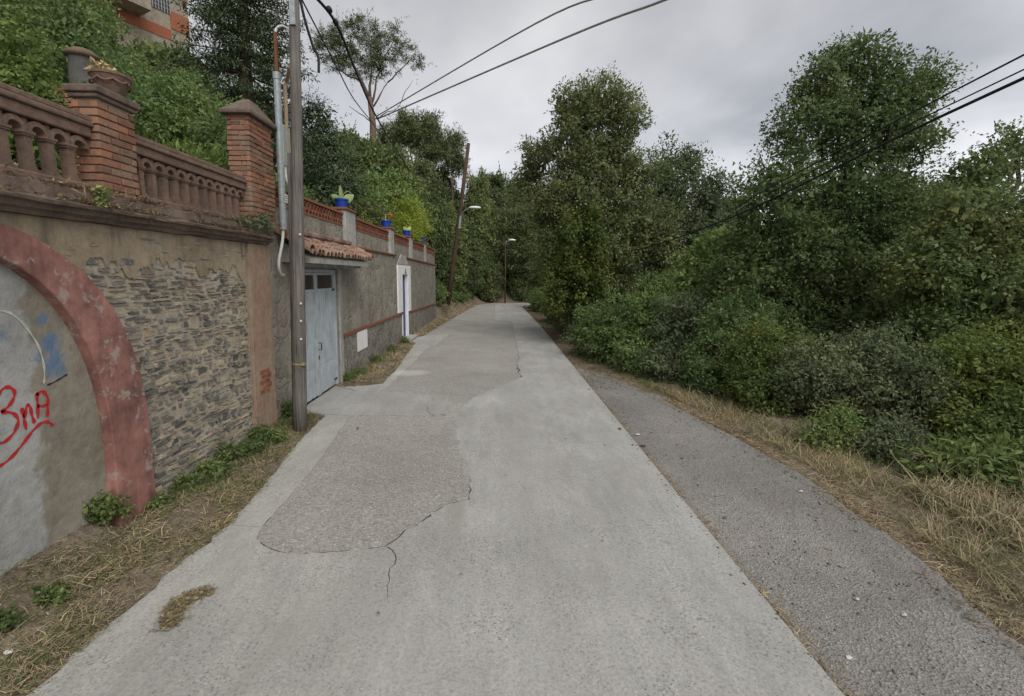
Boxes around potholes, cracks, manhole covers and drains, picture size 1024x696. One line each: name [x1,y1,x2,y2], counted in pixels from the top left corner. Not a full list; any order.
crack [257,489,472,598]
